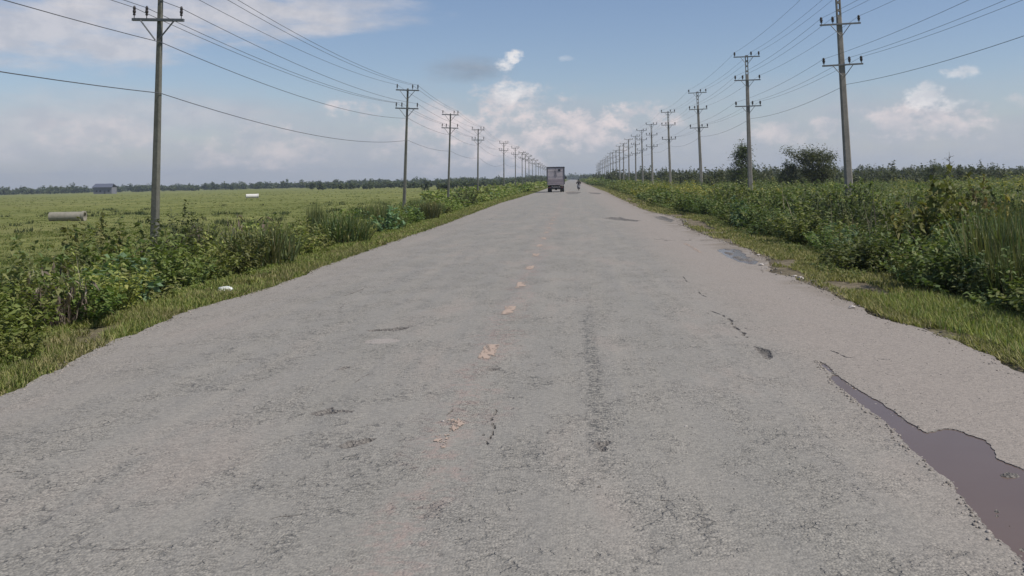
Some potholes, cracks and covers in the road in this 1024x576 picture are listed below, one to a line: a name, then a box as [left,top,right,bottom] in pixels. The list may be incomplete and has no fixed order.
crack [482,409,498,445]
pothole [717,248,759,265]
crack [683,277,748,338]
pothole [753,346,773,360]
pothole [819,361,1024,561]
